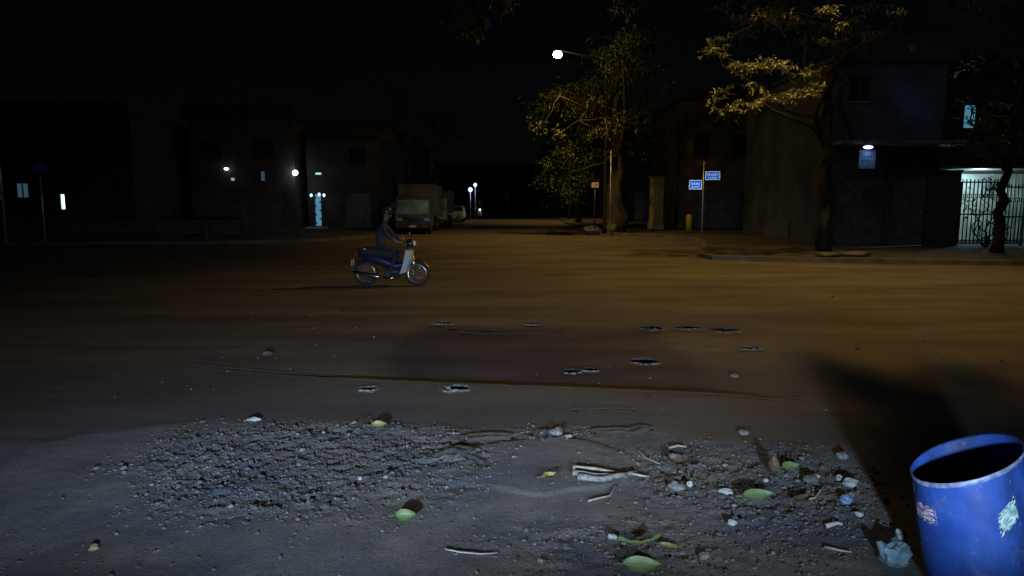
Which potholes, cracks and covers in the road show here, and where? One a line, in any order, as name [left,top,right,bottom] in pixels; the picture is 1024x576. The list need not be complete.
pothole [575,366,604,374]
pothole [619,355,671,368]
pothole [631,324,674,332]
pothole [351,384,385,394]
pothole [432,382,480,395]
pothole [554,367,587,376]
pothole [699,326,750,334]
pothole [666,324,707,332]
